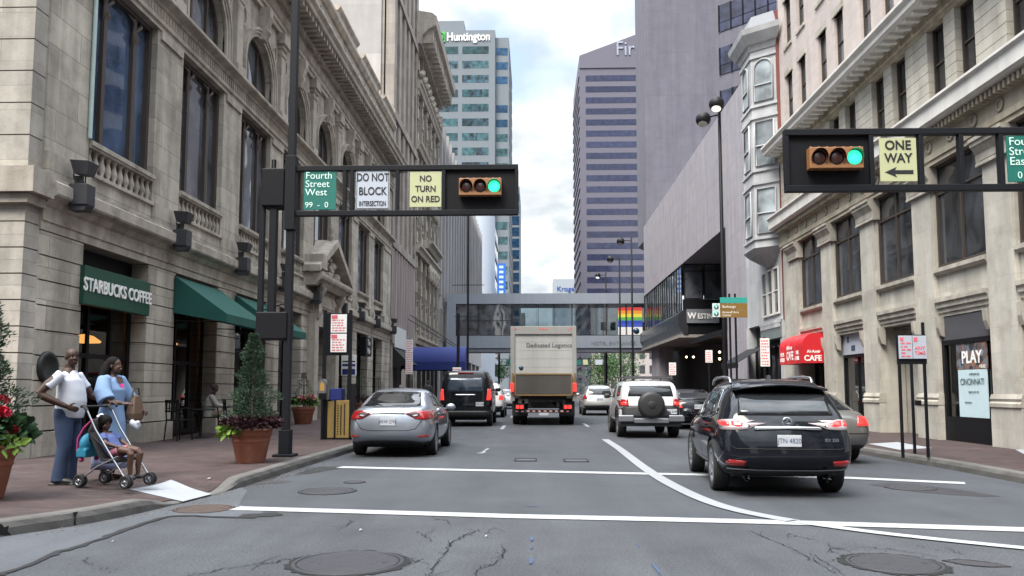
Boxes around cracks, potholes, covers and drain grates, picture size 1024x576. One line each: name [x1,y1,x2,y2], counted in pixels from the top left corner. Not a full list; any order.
crack [404,516,507,576]
manhole cover [298,487,357,495]
crack [749,531,958,573]
manhole cover [284,550,412,576]
manhole cover [172,504,235,513]
manhole cover [836,553,954,576]
